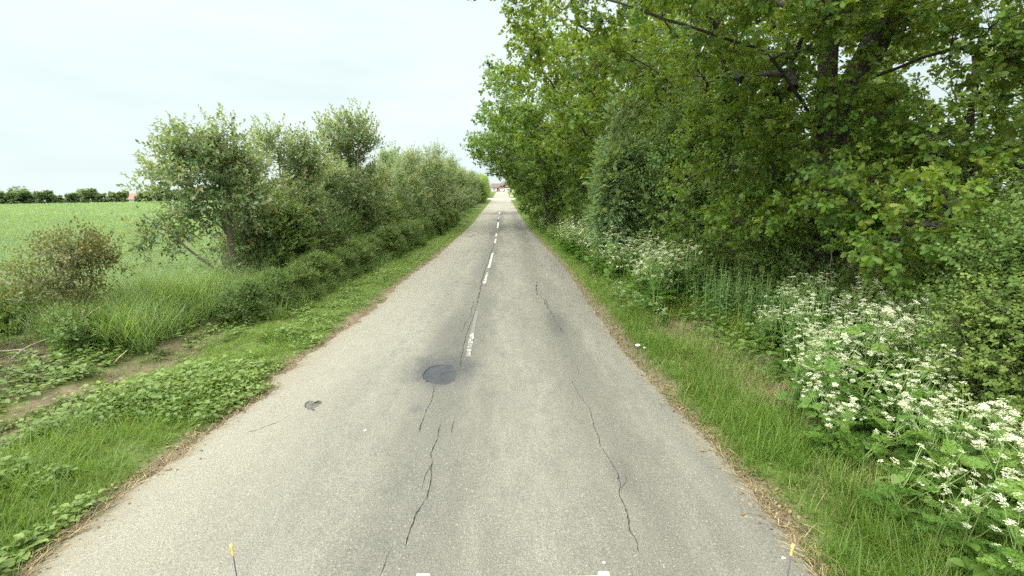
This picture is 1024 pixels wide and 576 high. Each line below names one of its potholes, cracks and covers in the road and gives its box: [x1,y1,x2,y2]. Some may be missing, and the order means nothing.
crack [530,276,563,333]
crack [566,356,639,552]
pothole [305,401,322,411]
crack [380,387,455,575]
